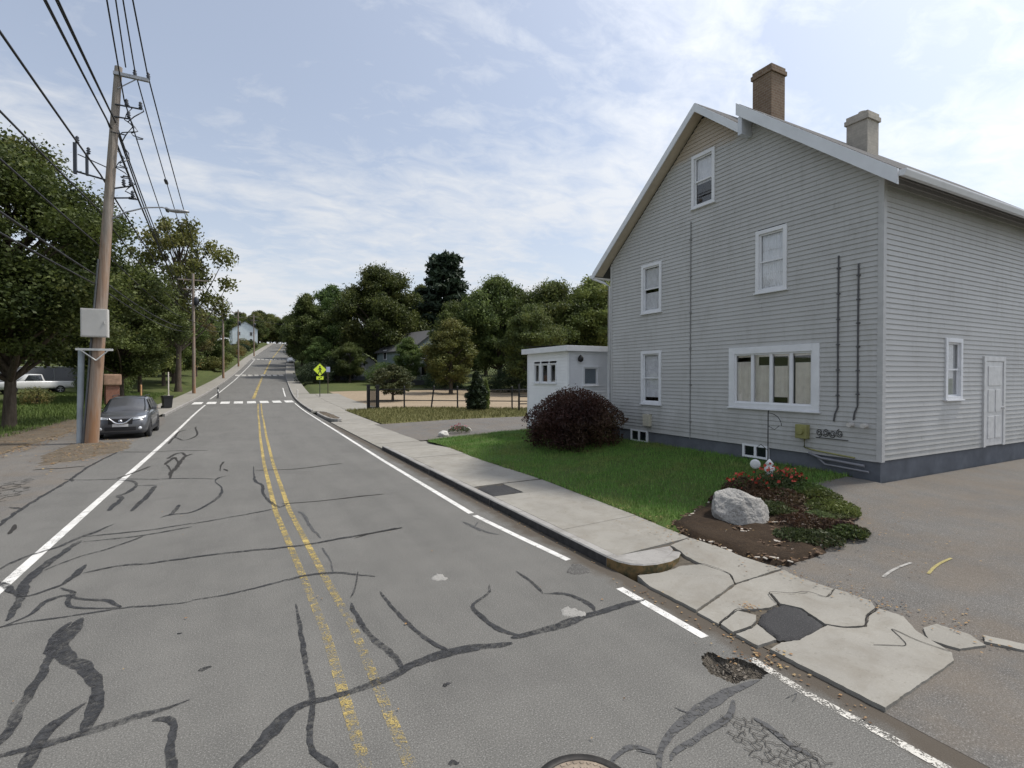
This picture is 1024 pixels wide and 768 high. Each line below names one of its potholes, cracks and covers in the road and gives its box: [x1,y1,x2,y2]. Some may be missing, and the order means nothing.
crack [719,588,835,632]
manhole cover [541,754,621,768]
crack [873,629,946,650]
crack [0,478,34,502]
crack [118,427,199,478]
pothole [701,652,768,684]
crack [163,462,228,517]
crack [720,713,834,768]
